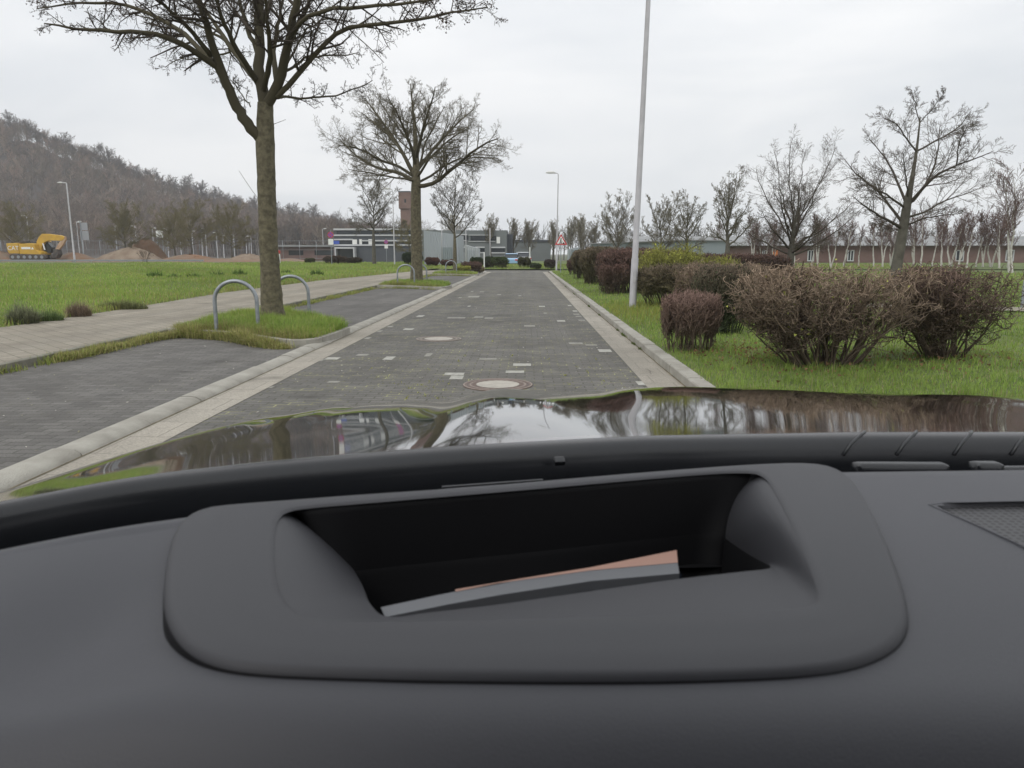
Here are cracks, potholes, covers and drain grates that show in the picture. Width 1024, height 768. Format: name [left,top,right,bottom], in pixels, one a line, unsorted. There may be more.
manhole cover [463,378,533,391]
